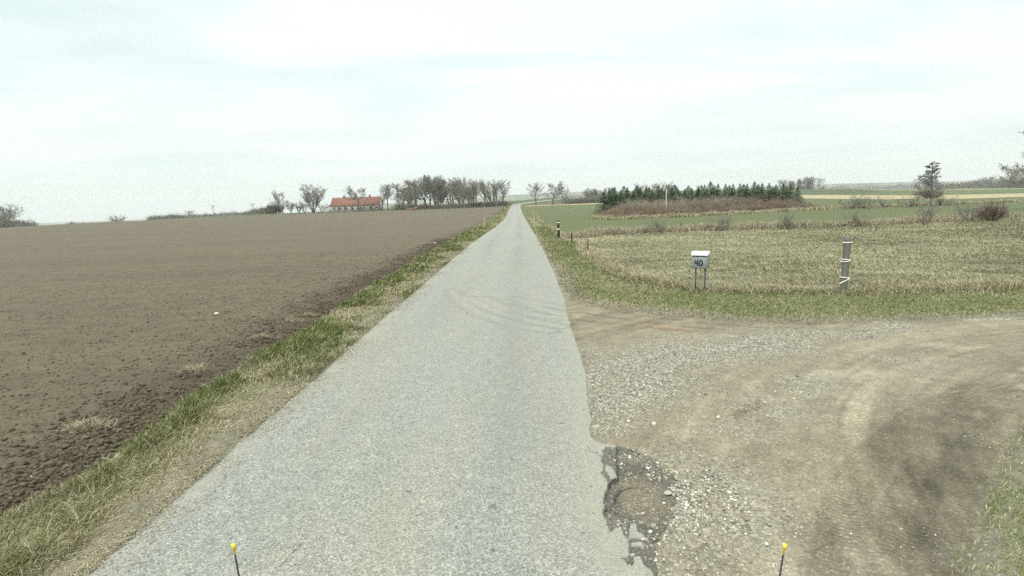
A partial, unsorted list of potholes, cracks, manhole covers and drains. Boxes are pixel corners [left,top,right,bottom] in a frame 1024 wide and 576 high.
pothole [601,446,677,576]
